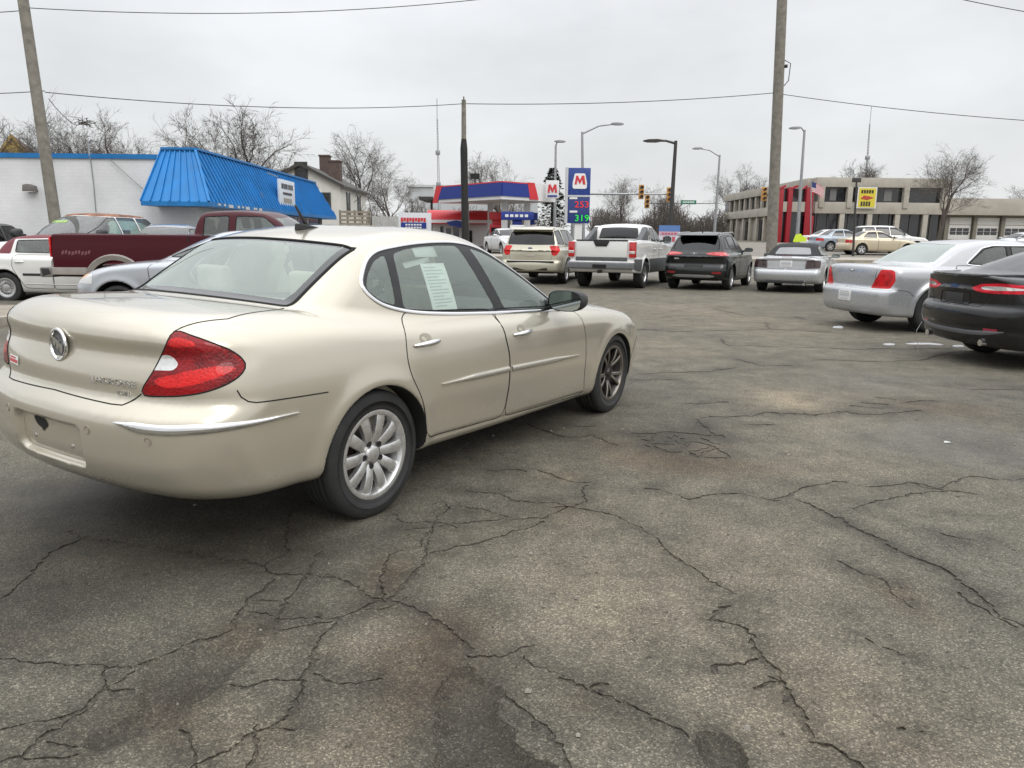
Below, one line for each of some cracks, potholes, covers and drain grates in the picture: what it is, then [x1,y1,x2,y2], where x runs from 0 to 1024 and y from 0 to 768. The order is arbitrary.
crack [527,397,939,459]
crack [632,308,952,380]
crack [0,469,1024,768]
